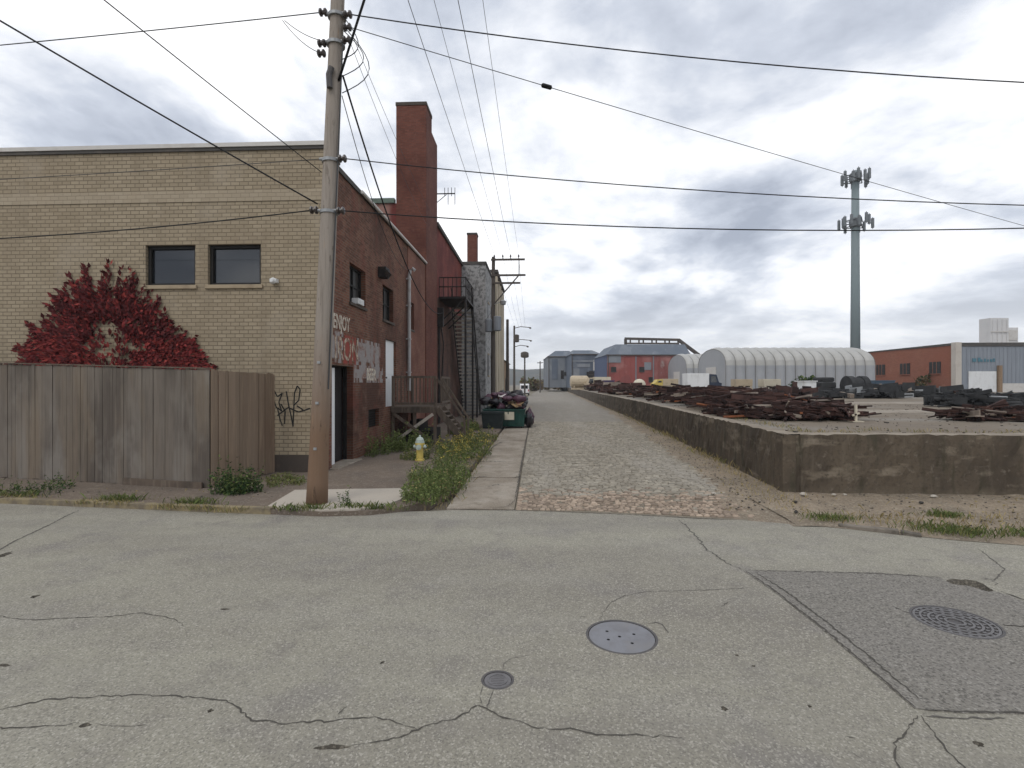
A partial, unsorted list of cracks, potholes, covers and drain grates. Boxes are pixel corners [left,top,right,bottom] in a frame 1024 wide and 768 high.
utility cover [481,670,514,690]
crack [455,509,741,569]
crack [600,586,756,618]
crack [982,551,1024,600]
crack [3,613,185,627]
crack [0,686,681,745]
manhole cover [909,605,1006,639]
pothole [946,579,994,592]
manhole cover [586,620,658,655]
